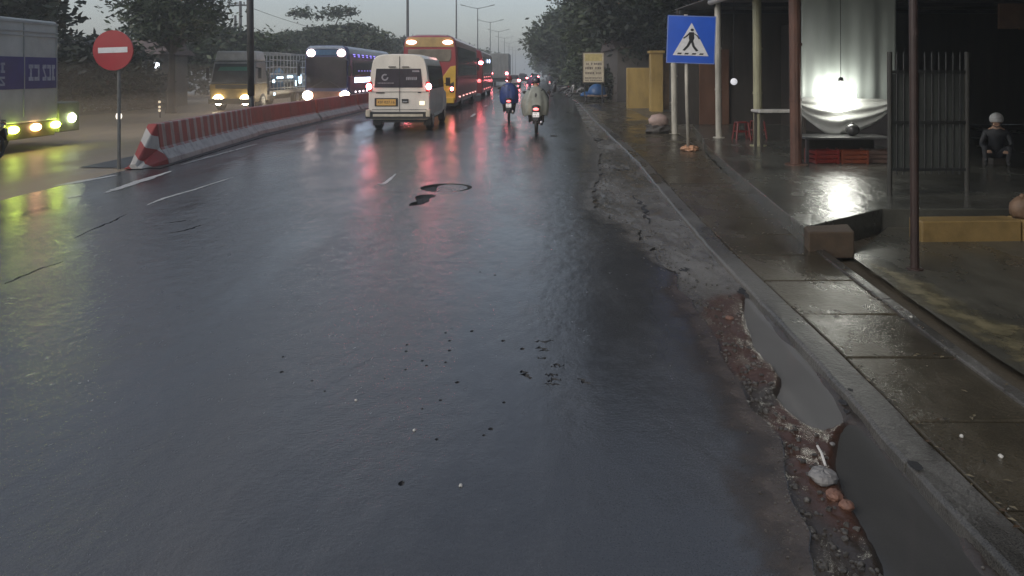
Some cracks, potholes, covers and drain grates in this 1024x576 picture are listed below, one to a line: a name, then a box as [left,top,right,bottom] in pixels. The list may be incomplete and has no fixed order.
crack [5,261,63,284]
pothole [409,194,436,206]
crack [631,195,651,223]
